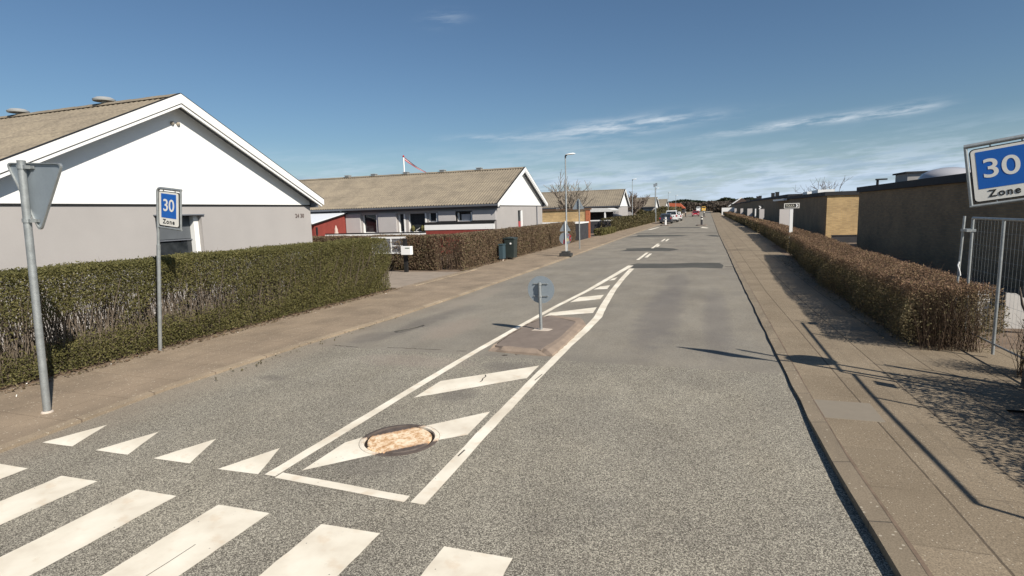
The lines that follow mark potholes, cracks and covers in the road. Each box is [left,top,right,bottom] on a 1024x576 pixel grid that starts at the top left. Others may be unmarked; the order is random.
manhole cover [359,424,439,456]
